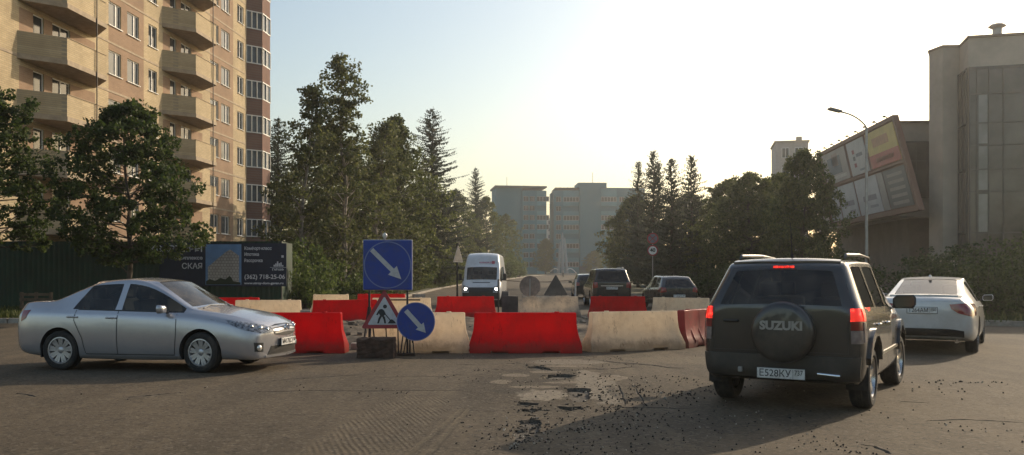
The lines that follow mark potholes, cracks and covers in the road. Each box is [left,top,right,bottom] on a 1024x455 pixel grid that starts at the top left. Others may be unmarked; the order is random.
pothole [567,388,592,402]
crack [584,356,695,409]
pothole [512,419,543,443]
